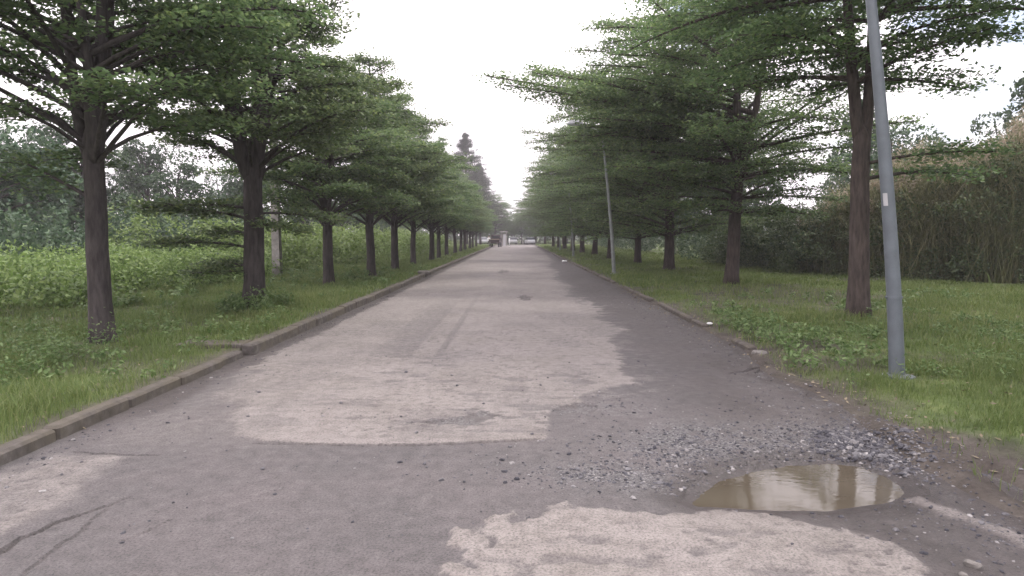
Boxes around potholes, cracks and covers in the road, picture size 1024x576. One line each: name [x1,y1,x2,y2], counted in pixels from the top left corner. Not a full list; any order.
crack [0,496,173,576]
pothole [670,453,934,517]
